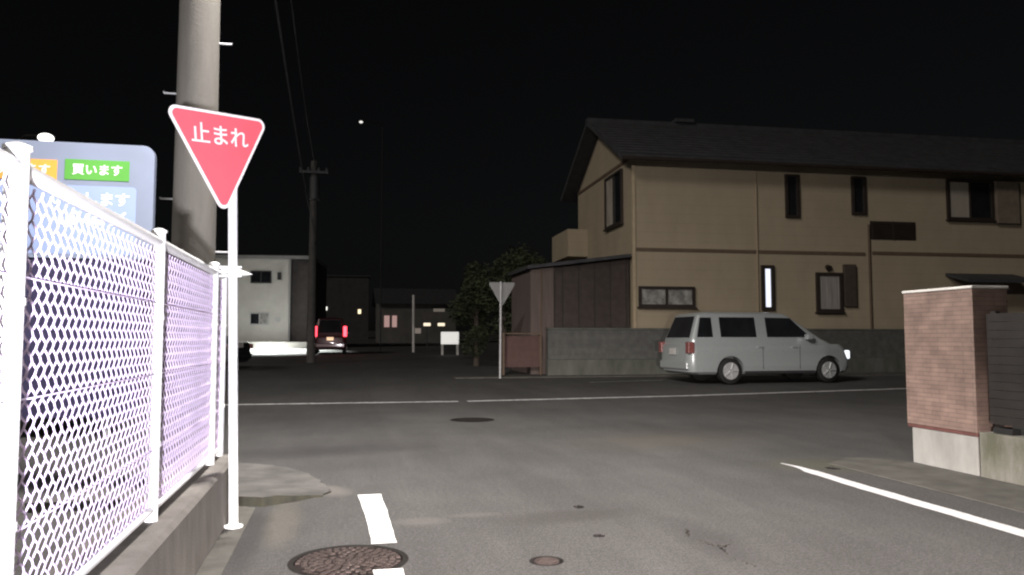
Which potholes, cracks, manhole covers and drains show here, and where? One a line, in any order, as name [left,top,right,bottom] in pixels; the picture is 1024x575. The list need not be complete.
manhole cover [287,545,408,575]
crack [685,529,756,567]
manhole cover [529,556,564,566]
